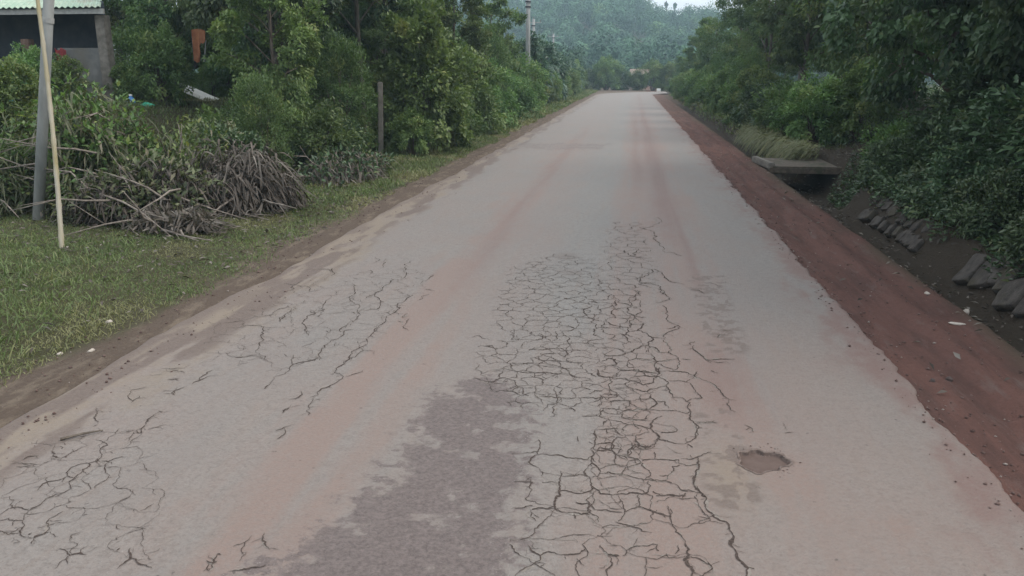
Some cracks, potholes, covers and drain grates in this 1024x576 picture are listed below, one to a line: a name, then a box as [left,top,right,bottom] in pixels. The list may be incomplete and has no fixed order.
crack [471,254,606,417]
crack [0,258,432,568]
crack [510,218,754,576]
pothole [736,448,795,474]
